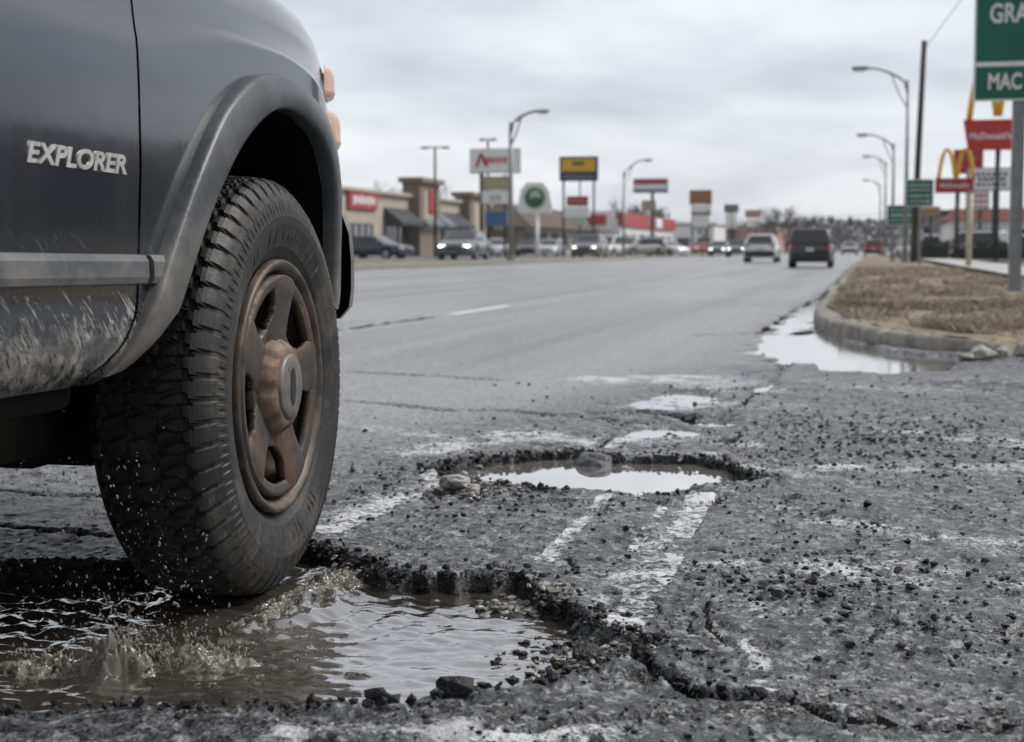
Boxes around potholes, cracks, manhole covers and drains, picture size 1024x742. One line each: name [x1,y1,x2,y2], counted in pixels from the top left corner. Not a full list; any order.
pothole [433,449,767,493]
crack [523,600,762,734]
pothole [0,539,632,717]
